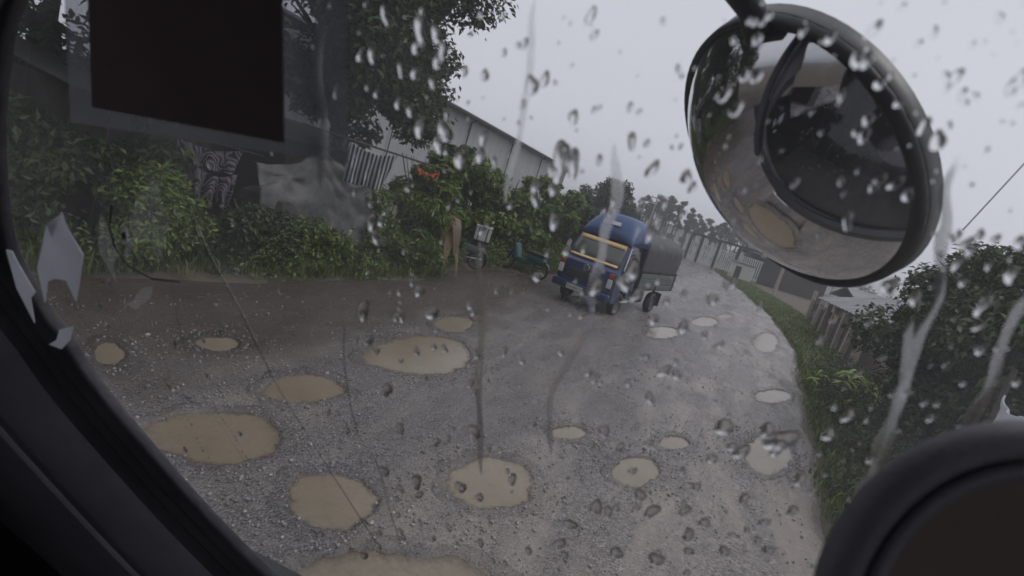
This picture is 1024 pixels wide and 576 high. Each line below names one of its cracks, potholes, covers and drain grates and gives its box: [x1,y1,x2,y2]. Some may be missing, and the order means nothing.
pothole [245,367,358,409]
pothole [347,331,481,380]
pothole [689,316,720,327]
pothole [540,420,596,446]
pothole [266,530,524,576]
pothole [177,331,253,357]
pothole [650,430,699,455]
pothole [736,432,801,480]
pothole [266,461,399,544]
pothole [750,332,782,353]
pothole [425,314,480,336]
pothole [641,325,683,340]
